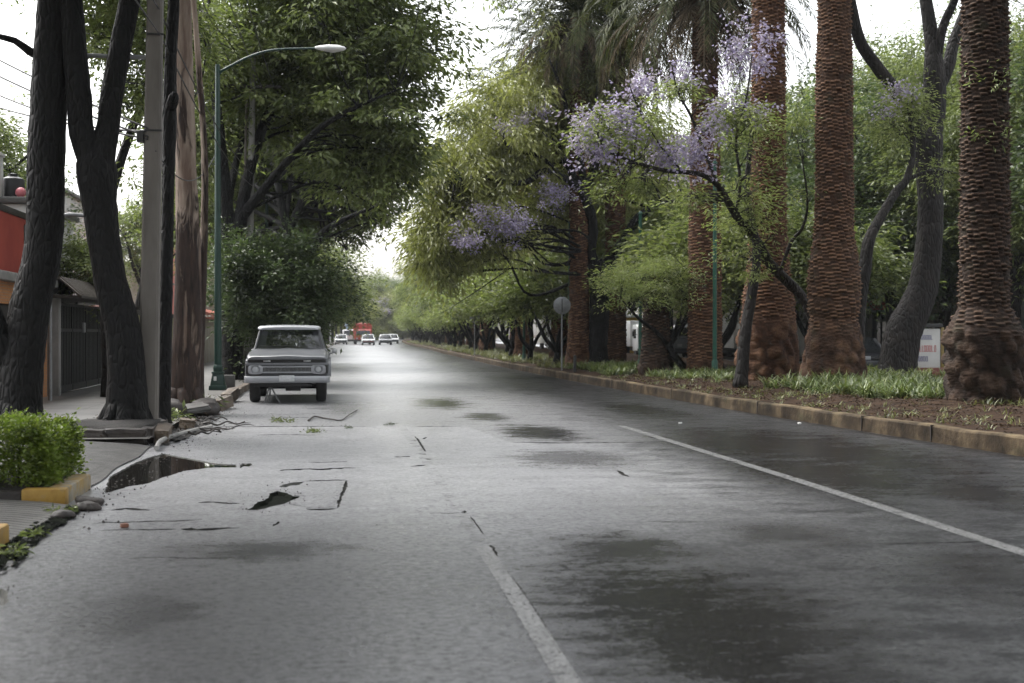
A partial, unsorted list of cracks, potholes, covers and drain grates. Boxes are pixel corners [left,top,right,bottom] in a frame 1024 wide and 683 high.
crack [280,462,348,510]
pothole [247,491,300,510]
crack [402,436,429,466]
crack [94,502,240,531]
pothole [105,454,236,493]
